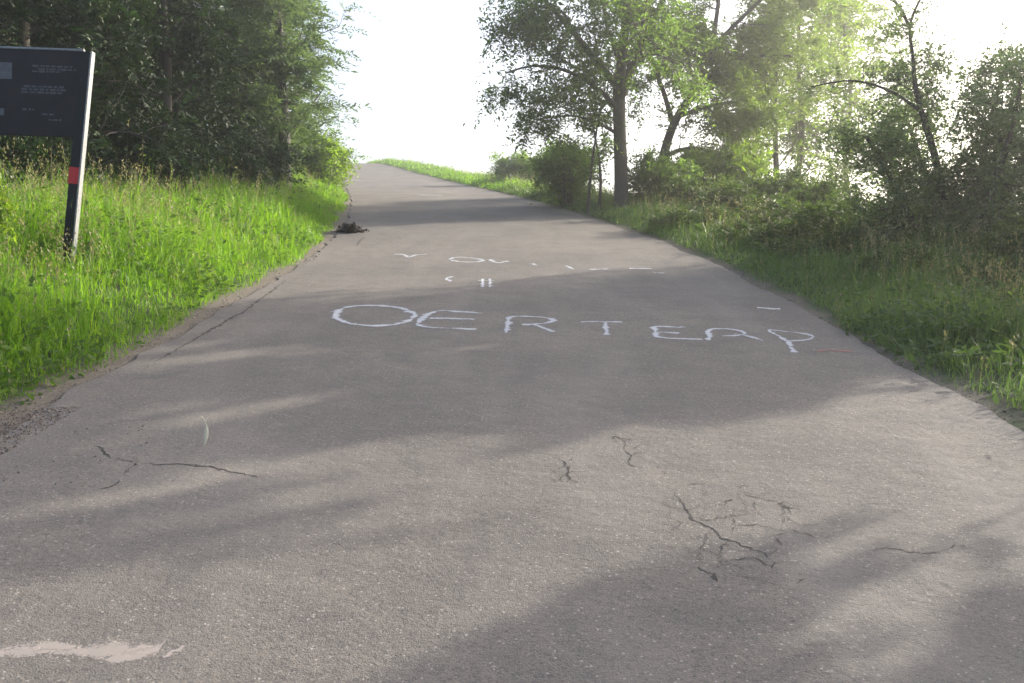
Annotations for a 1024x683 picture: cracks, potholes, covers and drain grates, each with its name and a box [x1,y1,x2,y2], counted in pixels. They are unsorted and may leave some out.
crack [148,277,290,367]
crack [98,446,263,489]
crack [667,483,816,586]
crack [613,435,646,467]
crack [544,457,584,483]
